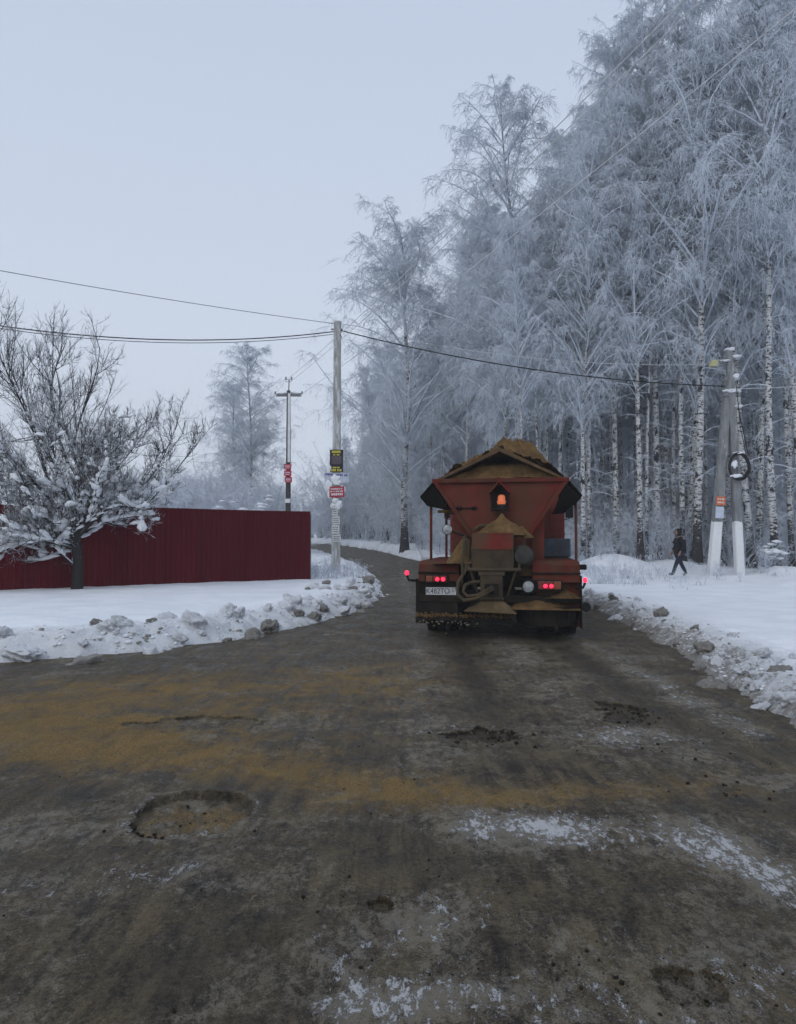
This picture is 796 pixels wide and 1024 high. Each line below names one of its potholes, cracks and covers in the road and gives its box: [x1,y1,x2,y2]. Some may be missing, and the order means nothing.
pothole [111,787,272,850]
pothole [108,713,278,738]
pothole [426,724,536,747]
pothole [354,893,408,920]
pothole [622,954,762,1024]
pothole [583,699,658,727]
